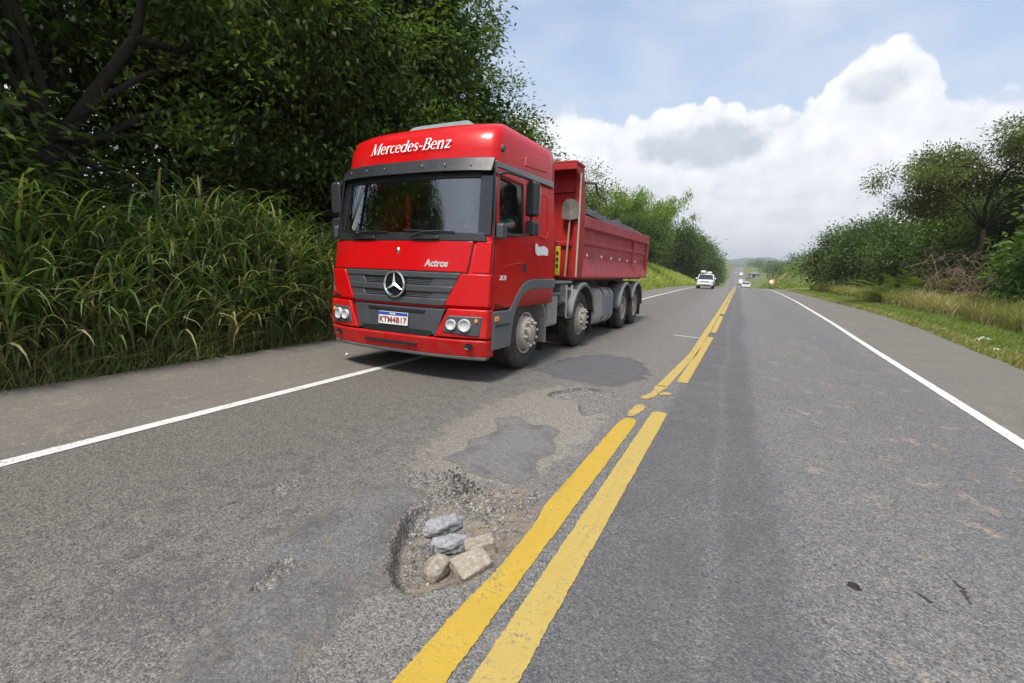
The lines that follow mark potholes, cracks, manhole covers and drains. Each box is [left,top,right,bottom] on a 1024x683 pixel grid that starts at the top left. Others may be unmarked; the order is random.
pothole [547,388,625,416]
pothole [249,557,298,592]
crack [945,573,972,605]
pothole [384,469,546,597]
